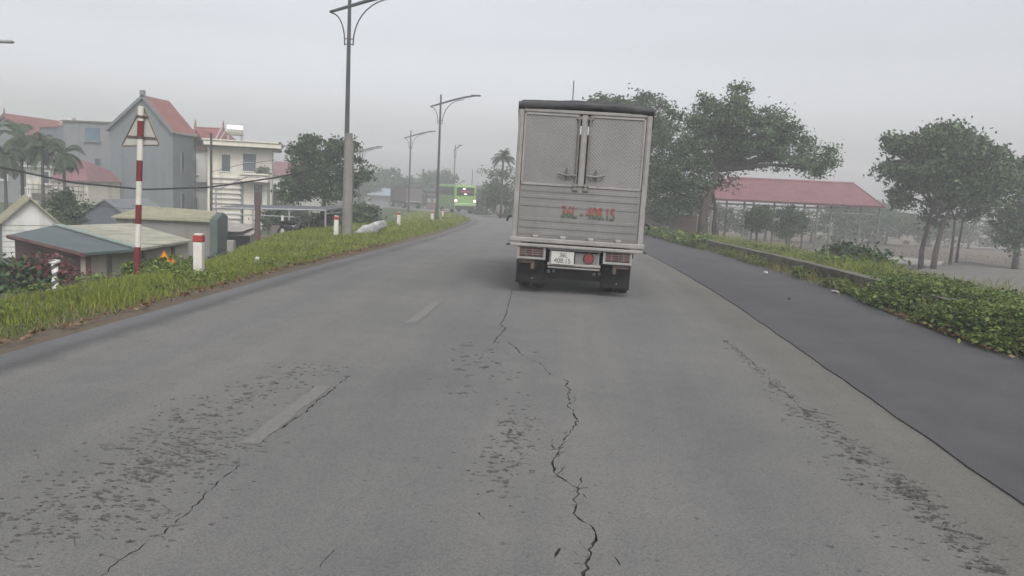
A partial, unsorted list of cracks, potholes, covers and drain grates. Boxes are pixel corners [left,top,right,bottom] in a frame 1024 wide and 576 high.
crack [429,290,598,576]
crack [0,364,368,576]
